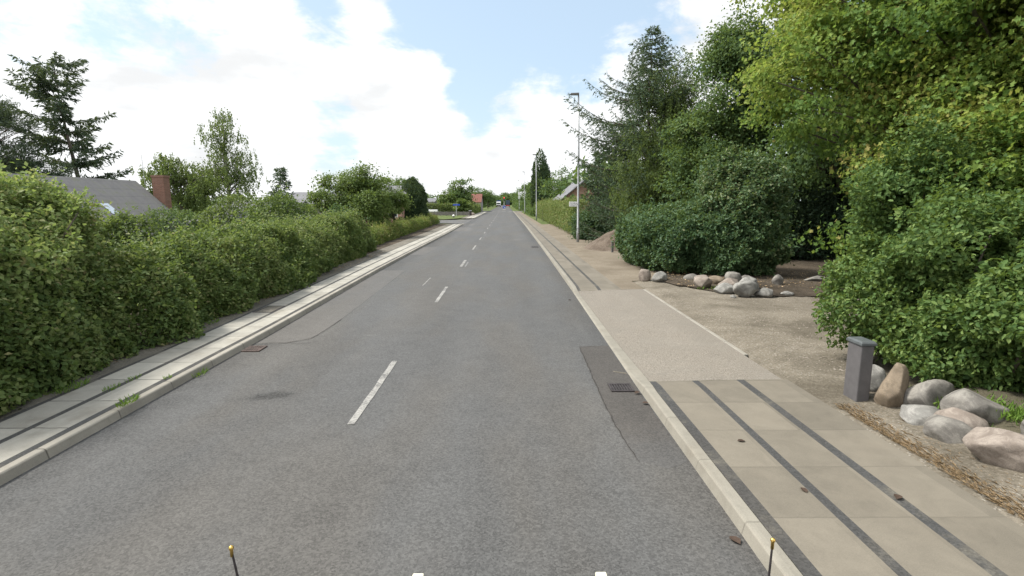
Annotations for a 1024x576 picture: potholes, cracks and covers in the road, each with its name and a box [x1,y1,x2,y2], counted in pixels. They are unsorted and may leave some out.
drain grate [607,383,635,392]
